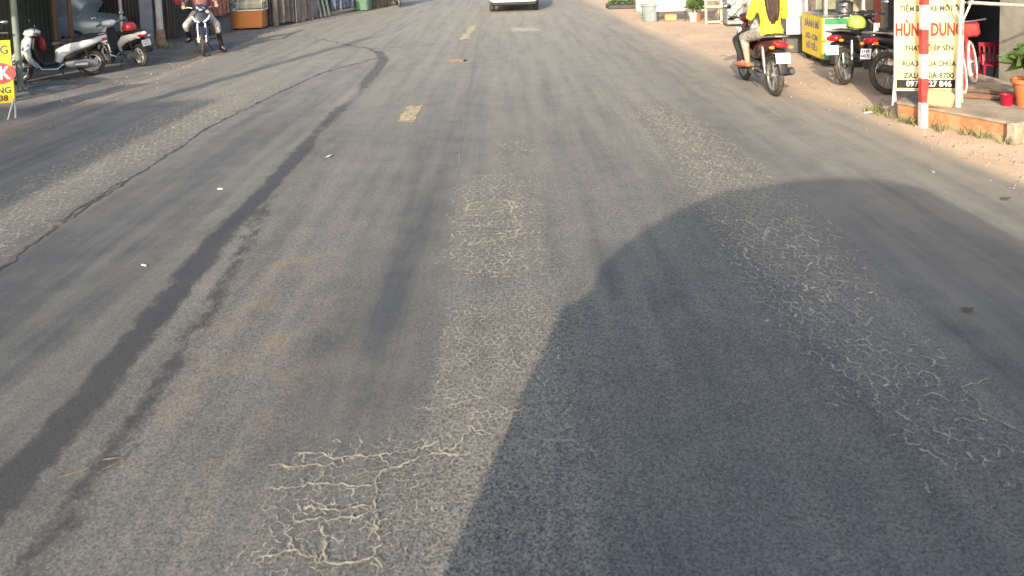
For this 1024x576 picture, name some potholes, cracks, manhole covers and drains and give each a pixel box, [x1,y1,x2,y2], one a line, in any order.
crack [0,76,286,256]
crack [416,294,600,501]
crack [624,92,1024,493]
crack [225,428,462,576]
